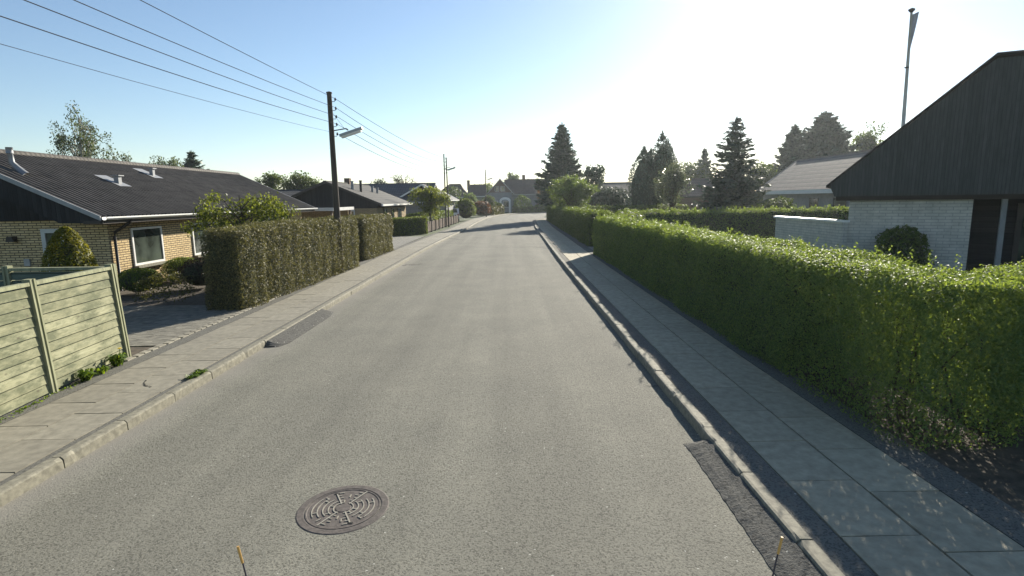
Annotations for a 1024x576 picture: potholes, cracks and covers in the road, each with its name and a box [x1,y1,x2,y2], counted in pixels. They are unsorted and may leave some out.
manhole cover [295,485,389,535]
